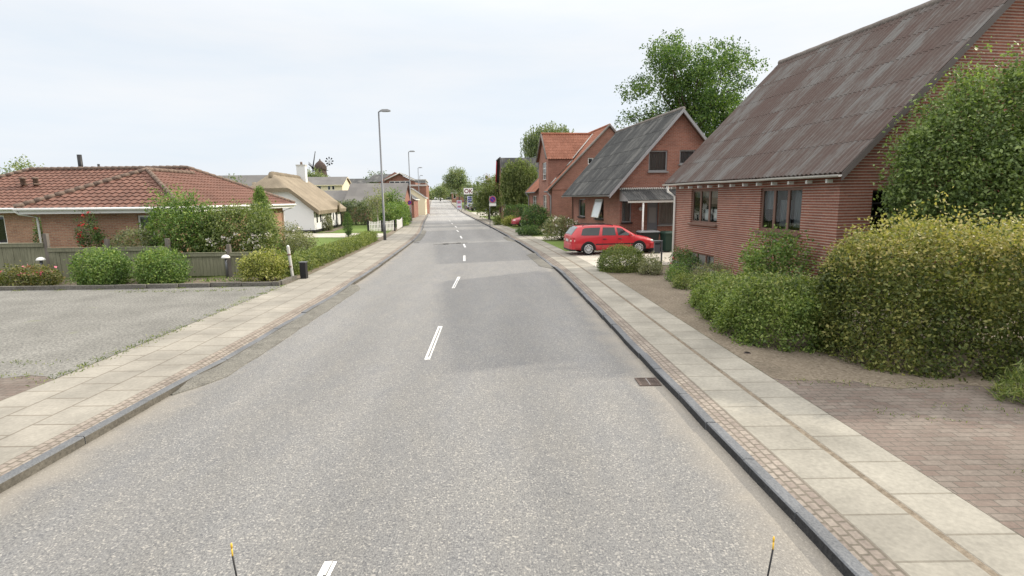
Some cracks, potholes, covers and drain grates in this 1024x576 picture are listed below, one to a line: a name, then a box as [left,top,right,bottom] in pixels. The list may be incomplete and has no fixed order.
drain grate [635,377,662,386]
